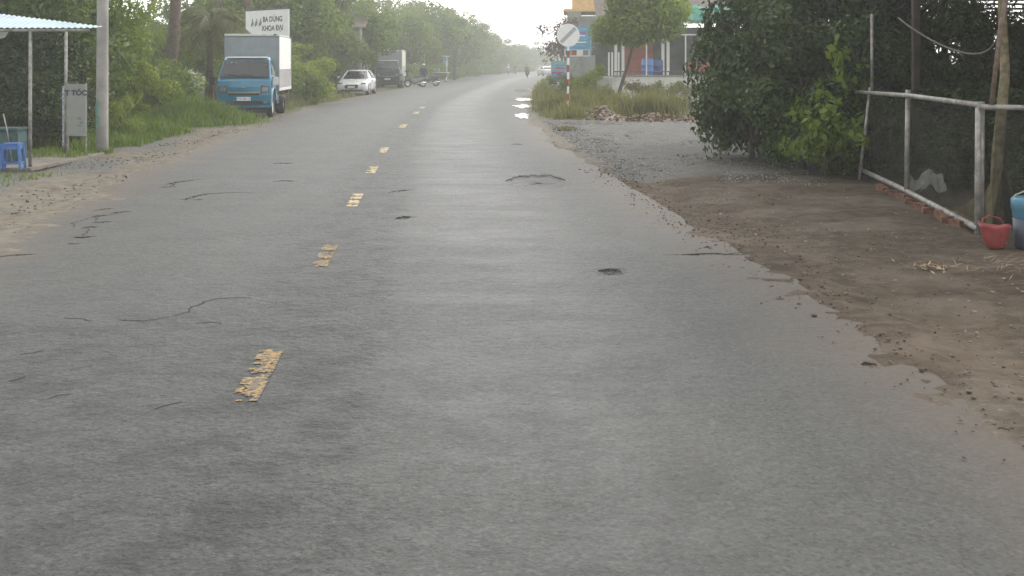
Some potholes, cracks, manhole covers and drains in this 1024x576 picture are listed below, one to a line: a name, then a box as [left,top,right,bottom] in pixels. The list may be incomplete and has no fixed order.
crack [67,208,130,245]
crack [10,297,242,409]
crack [160,179,255,201]
pothole [501,174,570,190]
pothole [593,268,626,277]
